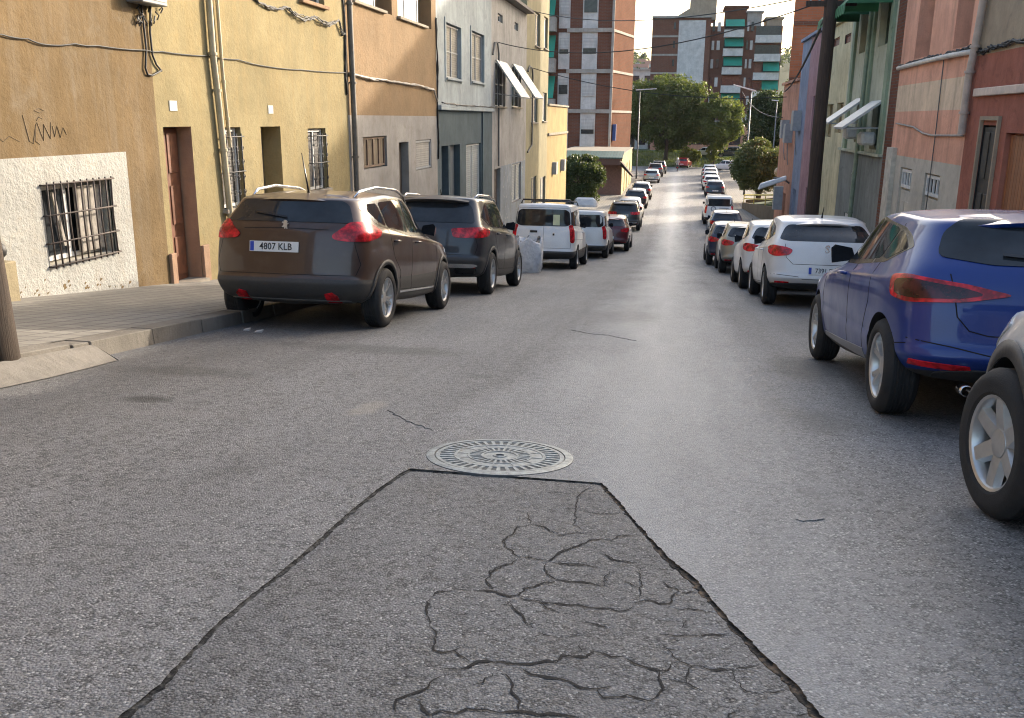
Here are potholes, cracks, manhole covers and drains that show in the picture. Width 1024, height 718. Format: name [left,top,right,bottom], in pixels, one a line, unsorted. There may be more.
crack [118,469,825,718]
manhole cover [426,439,573,478]
